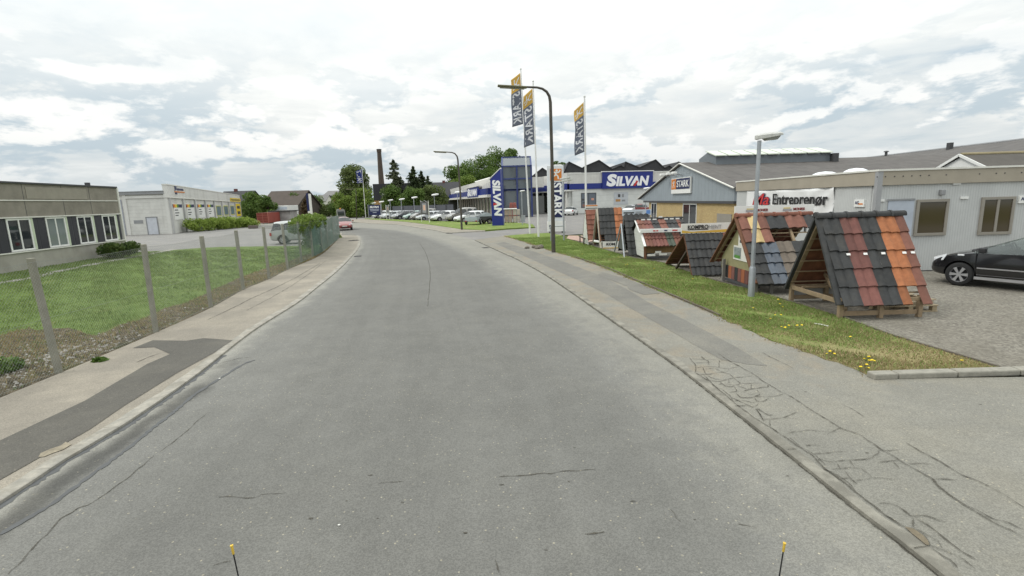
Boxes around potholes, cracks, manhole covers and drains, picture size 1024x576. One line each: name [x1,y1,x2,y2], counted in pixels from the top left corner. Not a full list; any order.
crack [8,415,205,574]
crack [692,355,1024,568]
crack [499,469,589,477]
